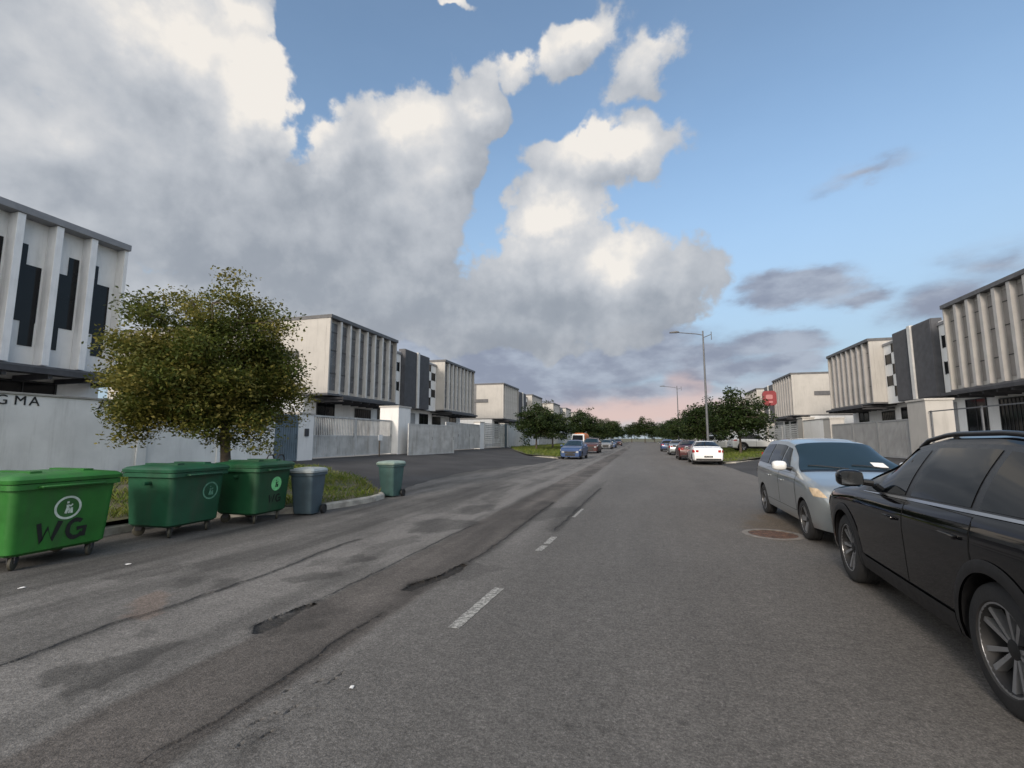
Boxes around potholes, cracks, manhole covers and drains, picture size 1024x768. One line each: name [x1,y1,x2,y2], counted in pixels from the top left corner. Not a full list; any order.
pothole [394,561,474,594]
pothole [238,598,327,638]
manhole cover [742,529,806,540]
crack [135,488,603,765]
